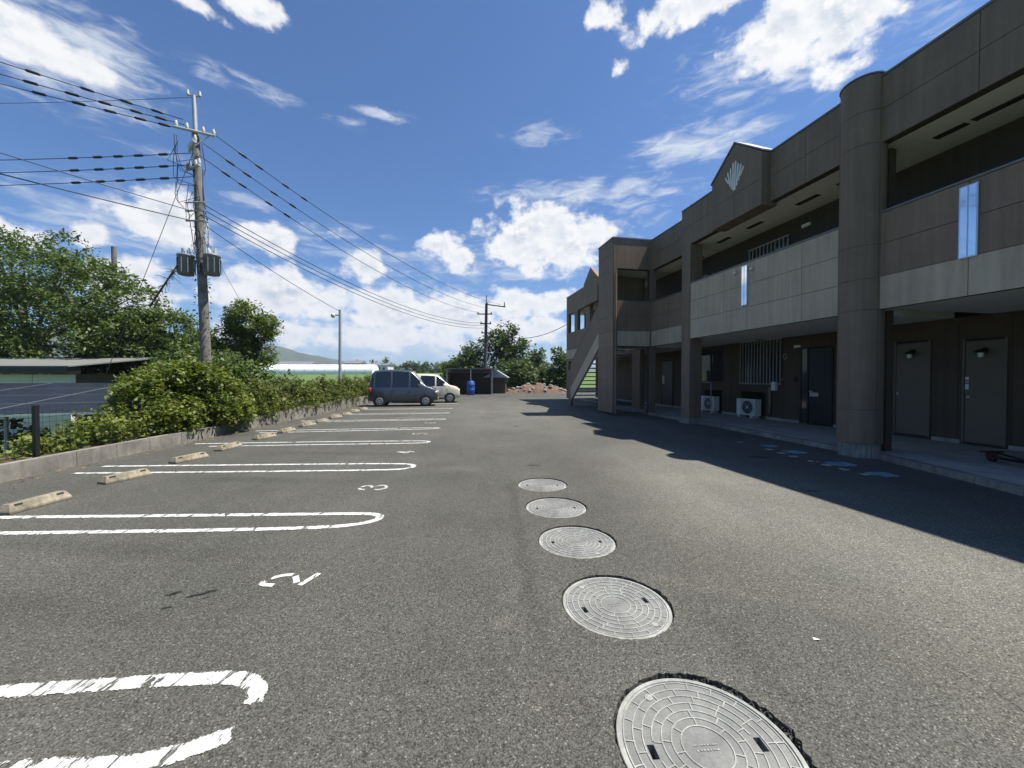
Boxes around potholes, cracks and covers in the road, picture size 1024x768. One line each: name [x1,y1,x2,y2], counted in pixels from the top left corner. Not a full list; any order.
manhole cover [525,498,587,518]
manhole cover [562,576,674,640]
manhole cover [610,672,815,768]
manhole cover [518,478,567,492]
manhole cover [538,526,617,559]
